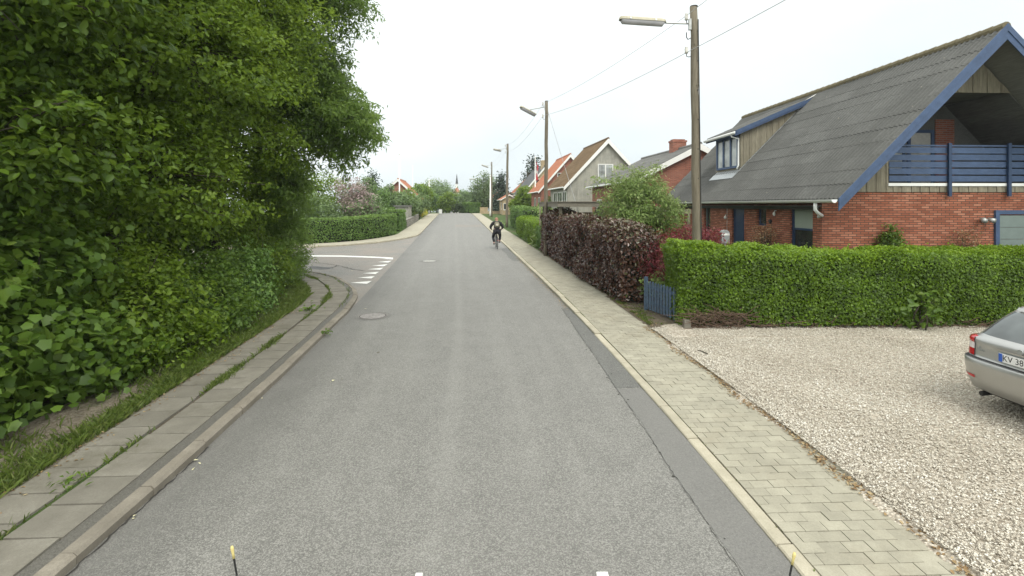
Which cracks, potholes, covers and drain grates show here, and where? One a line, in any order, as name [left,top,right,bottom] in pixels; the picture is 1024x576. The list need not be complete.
manhole cover [354,312,392,320]
